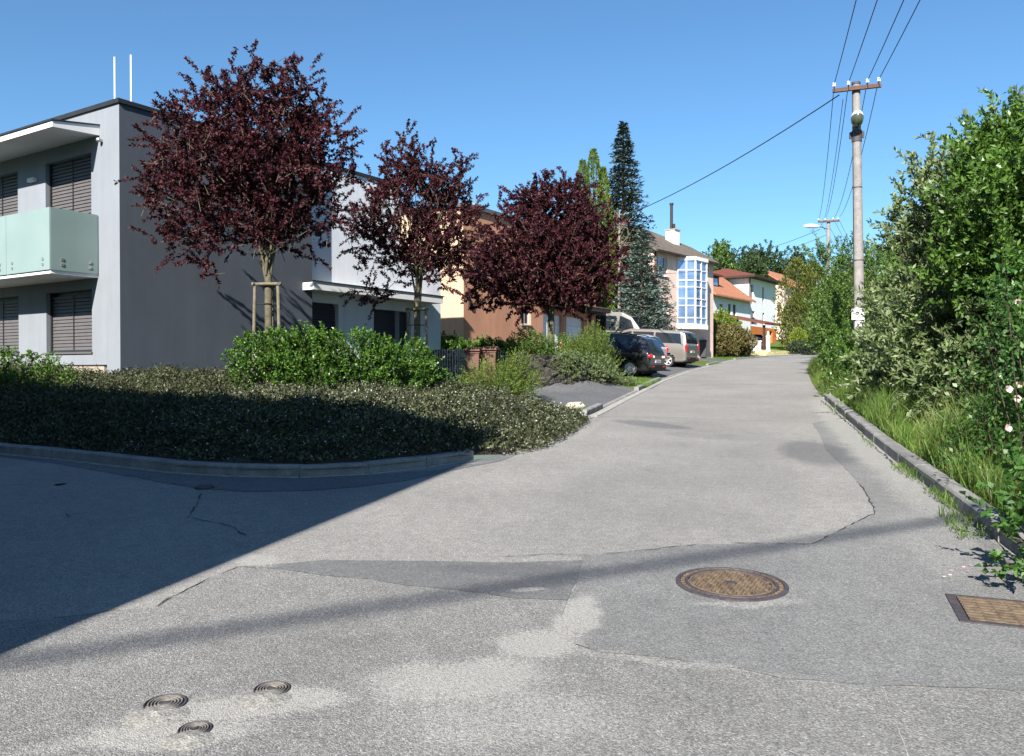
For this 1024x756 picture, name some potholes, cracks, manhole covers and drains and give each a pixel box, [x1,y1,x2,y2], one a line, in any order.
manhole cover [676,567,789,602]
crack [182,494,245,535]
drain grate [945,593,1024,629]
